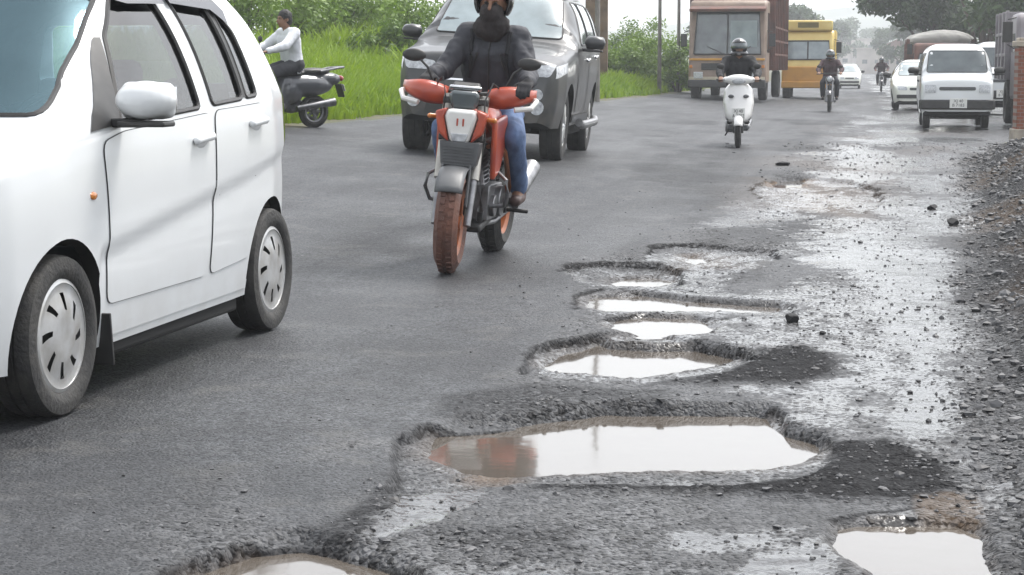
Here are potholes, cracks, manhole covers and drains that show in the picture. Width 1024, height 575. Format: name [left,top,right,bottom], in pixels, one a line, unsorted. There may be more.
pothole [507,332,767,388]
pothole [138,536,434,575]
pothole [637,241,790,275]
pothole [741,176,896,215]
pothole [585,315,741,353]
pothole [805,501,1019,575]
pothole [550,259,694,296]
pothole [559,287,804,321]
pothole [377,405,851,499]
